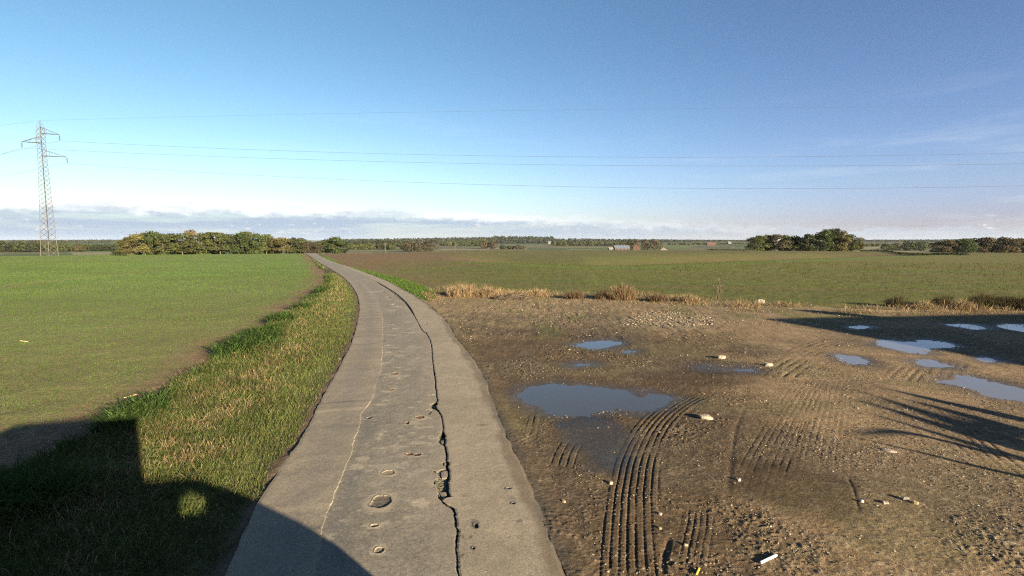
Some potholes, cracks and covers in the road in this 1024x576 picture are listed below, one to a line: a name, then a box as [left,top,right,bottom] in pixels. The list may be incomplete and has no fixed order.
pothole [368,494,393,509]
crack [377,282,460,576]
